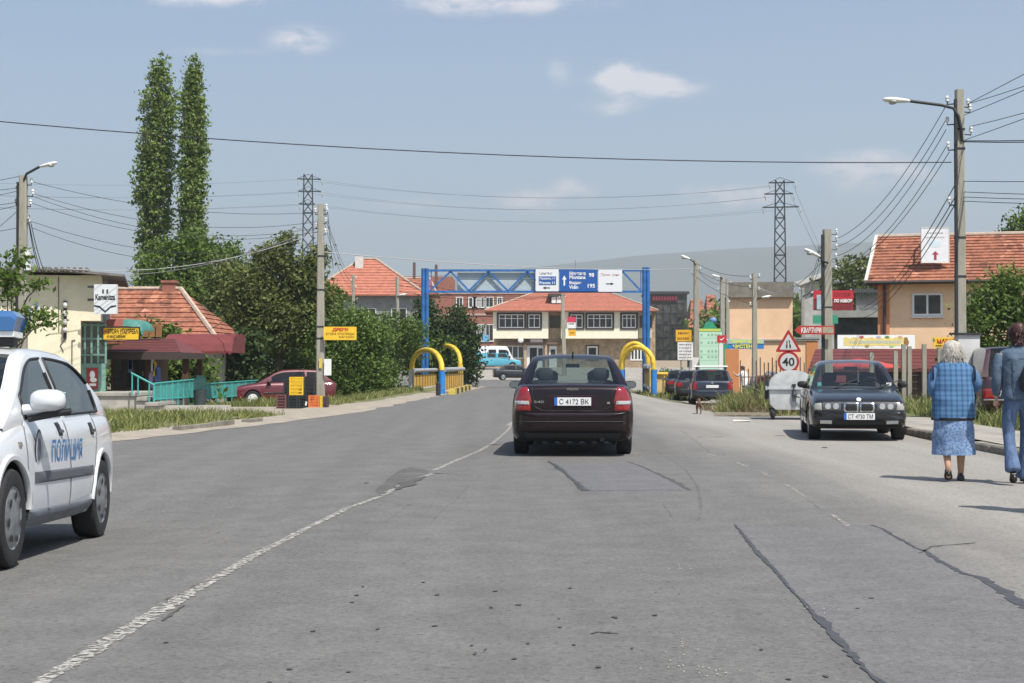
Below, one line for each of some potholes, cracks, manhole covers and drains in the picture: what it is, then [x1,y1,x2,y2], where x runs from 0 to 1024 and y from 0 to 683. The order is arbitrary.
crack [626,457,701,509]
